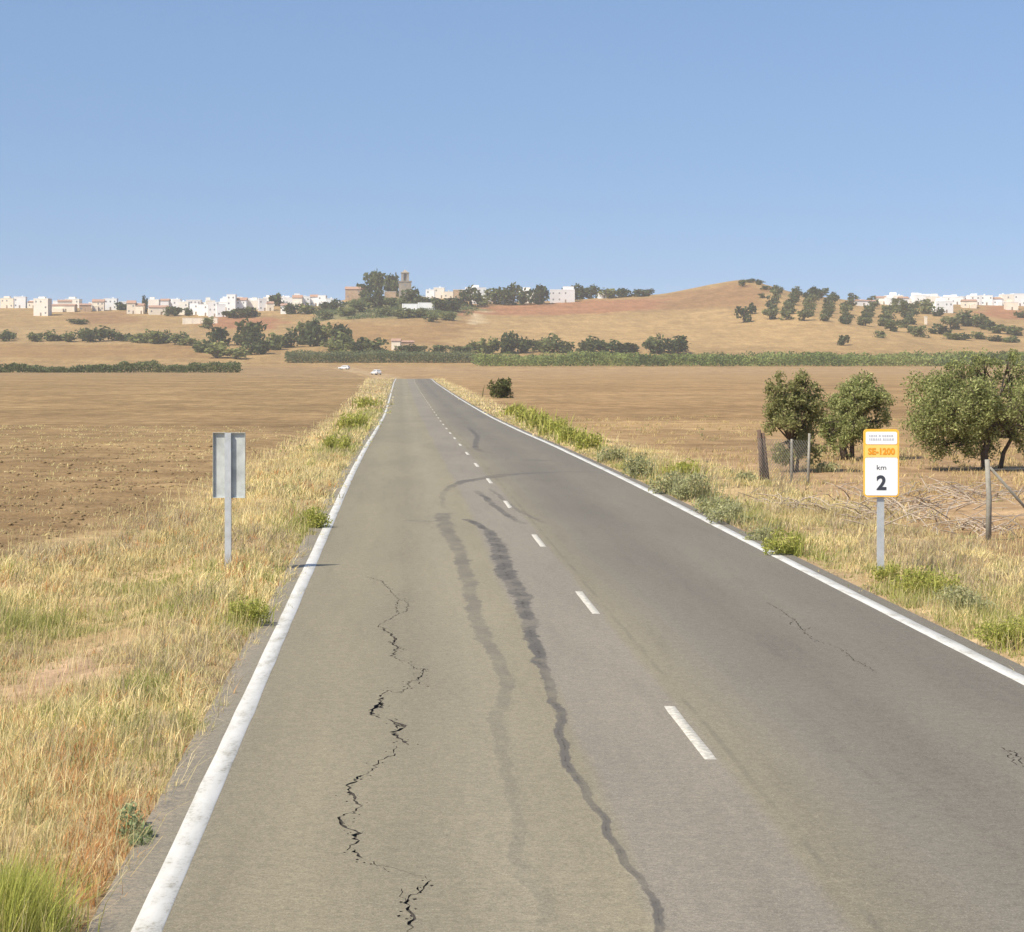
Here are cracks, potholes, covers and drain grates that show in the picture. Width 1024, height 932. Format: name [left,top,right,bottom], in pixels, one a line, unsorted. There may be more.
crack [768,603,873,670]
crack [335,459,670,932]
